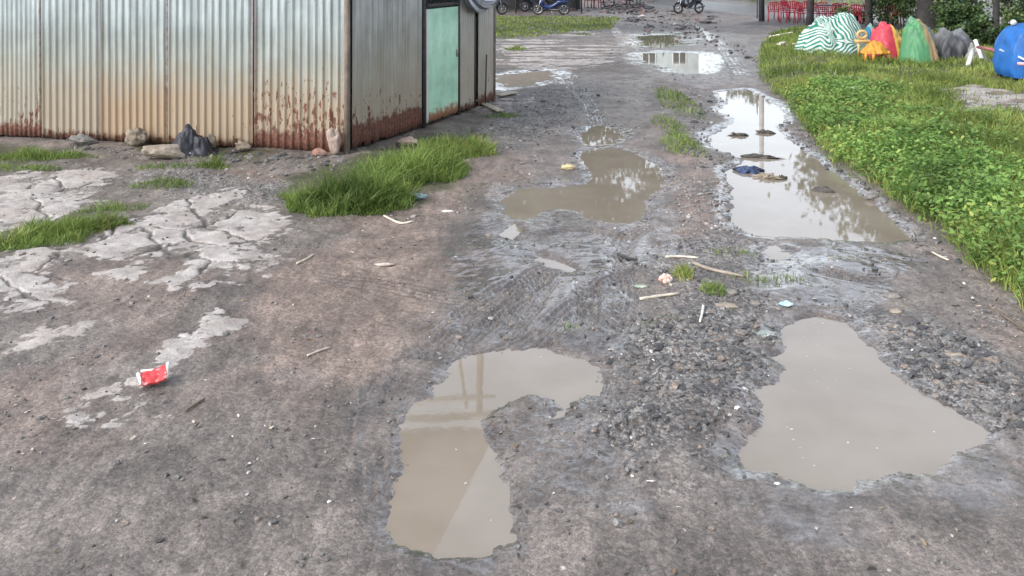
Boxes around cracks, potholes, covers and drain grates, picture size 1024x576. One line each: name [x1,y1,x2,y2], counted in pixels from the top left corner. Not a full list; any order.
pothole [620,32,699,48]
pothole [567,123,635,146]
pothole [714,306,1010,497]
pothole [489,144,677,225]
pothole [369,339,627,574]
pothole [626,50,726,75]
crack [0,175,101,223]
crack [0,198,281,302]
pothole [694,88,928,245]
pothole [496,68,577,91]
